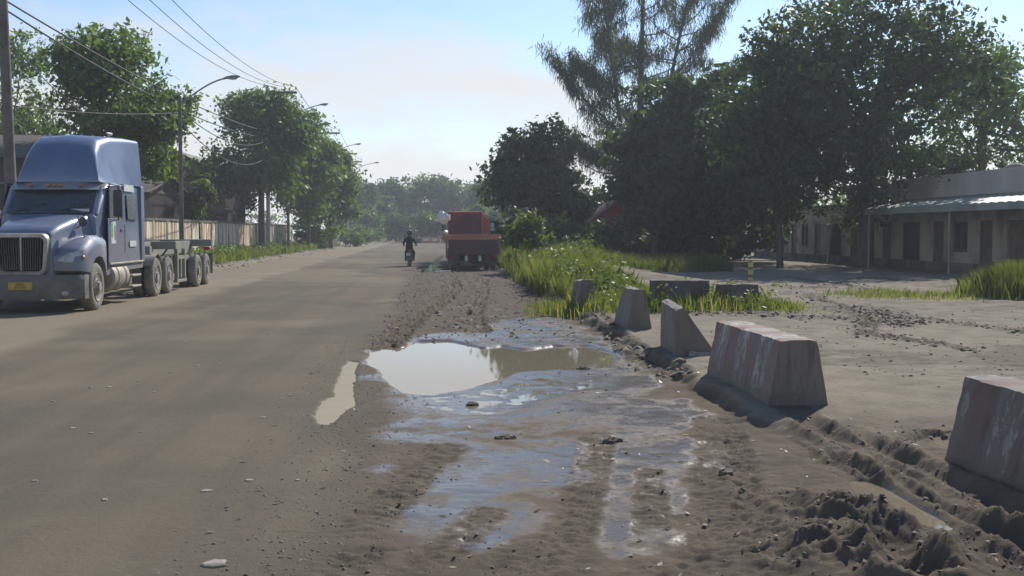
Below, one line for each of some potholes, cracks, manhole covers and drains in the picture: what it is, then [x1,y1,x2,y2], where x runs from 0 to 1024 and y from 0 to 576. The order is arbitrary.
pothole [304,359,364,426]
pothole [353,338,624,398]
